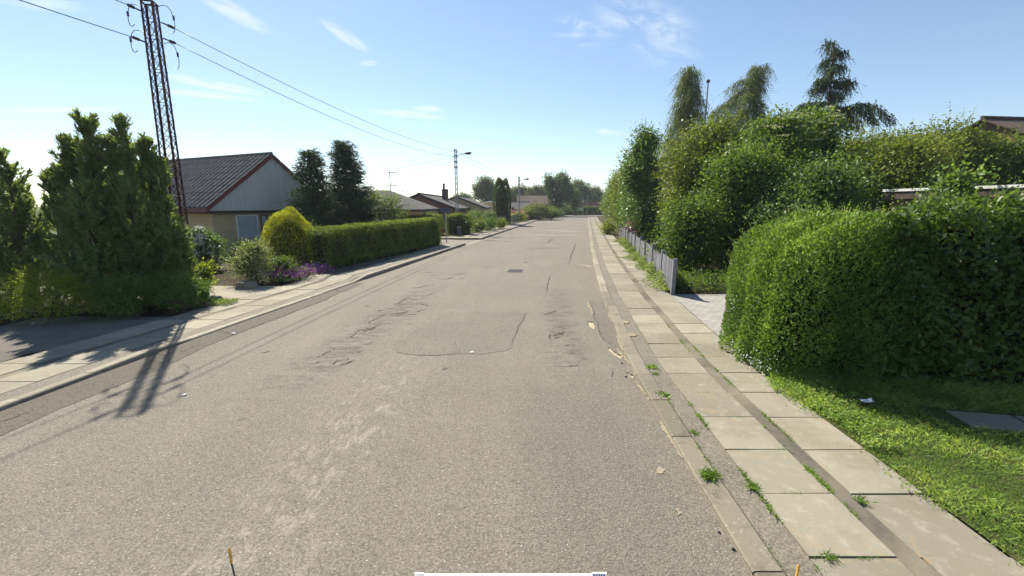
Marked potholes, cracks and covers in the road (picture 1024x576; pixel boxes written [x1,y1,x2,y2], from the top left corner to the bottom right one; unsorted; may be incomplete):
crack [311,272,464,365]
crack [544,309,611,367]
crack [543,230,592,290]
